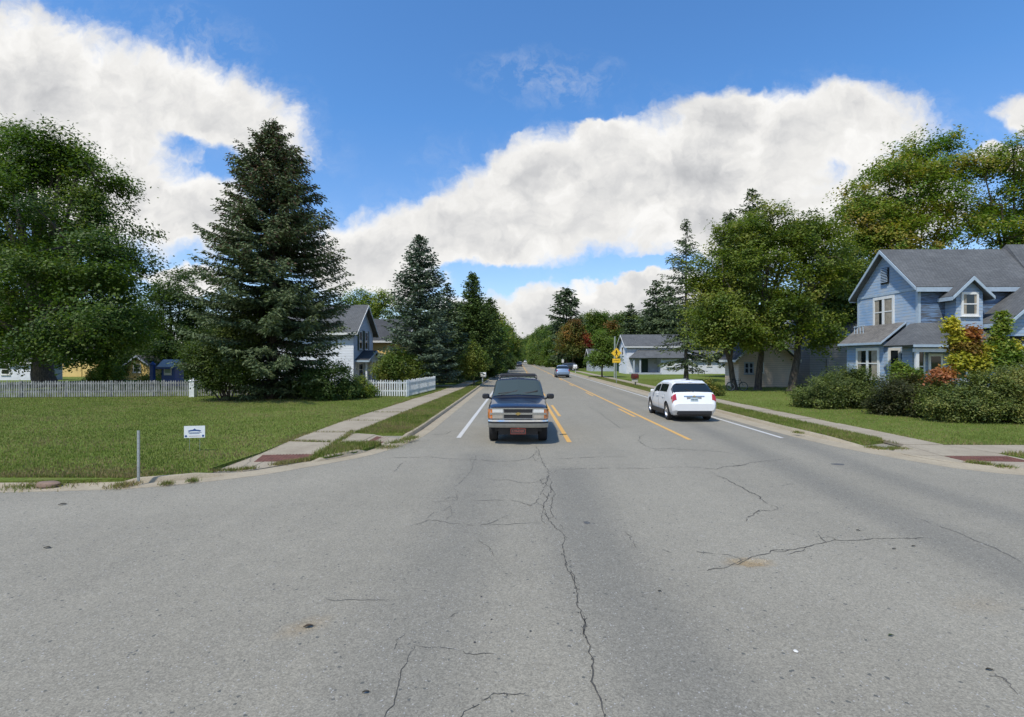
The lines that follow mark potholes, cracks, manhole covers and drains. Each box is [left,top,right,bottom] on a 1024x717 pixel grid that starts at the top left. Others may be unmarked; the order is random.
crack [391,437,778,717]
crack [663,534,922,571]
